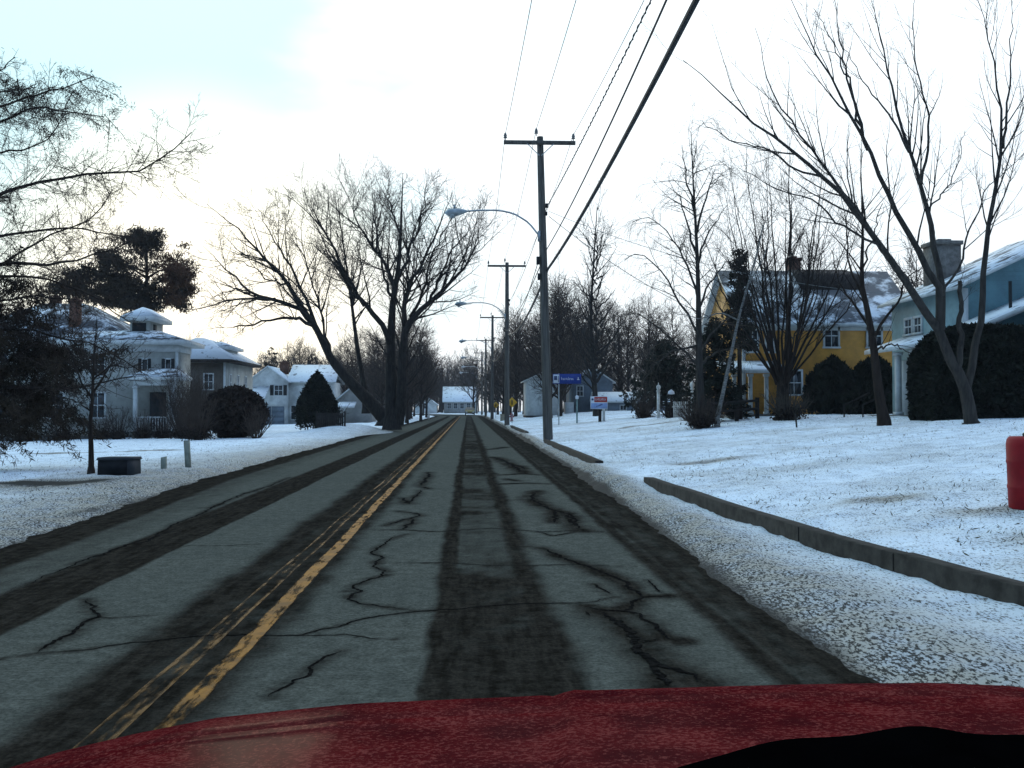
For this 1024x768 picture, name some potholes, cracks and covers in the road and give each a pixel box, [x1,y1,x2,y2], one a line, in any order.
crack [9,447,704,686]
crack [268,650,342,696]
